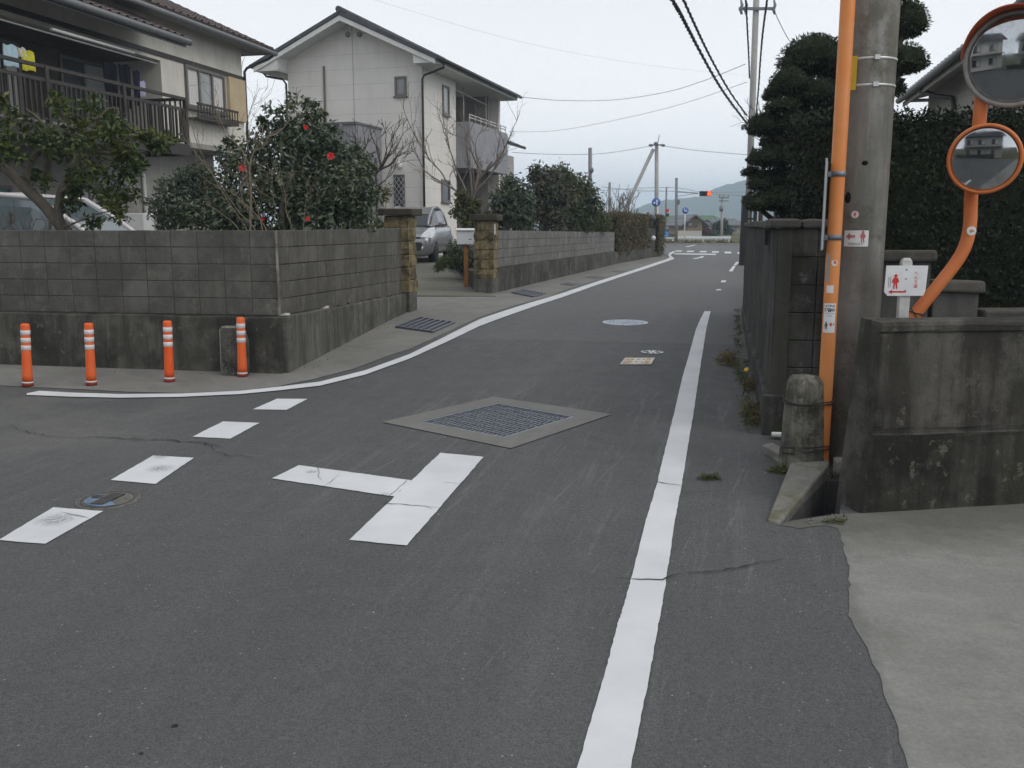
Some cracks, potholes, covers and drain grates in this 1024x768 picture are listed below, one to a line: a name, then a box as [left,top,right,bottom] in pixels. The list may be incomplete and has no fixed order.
drain grate [511,289,546,297]
drain grate [395,316,455,333]
manhole cover [74,490,141,511]
crack [11,425,249,457]
drain grate [384,397,611,448]
crack [630,558,784,580]
